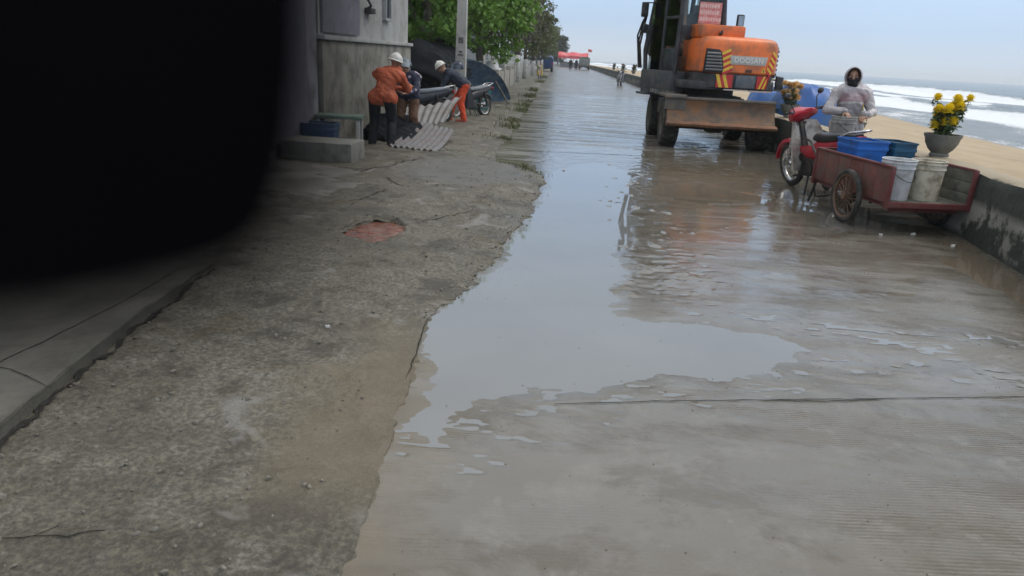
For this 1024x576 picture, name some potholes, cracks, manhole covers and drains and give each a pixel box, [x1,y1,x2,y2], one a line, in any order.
crack [356,157,424,200]
crack [9,525,104,538]
crack [407,318,429,375]
